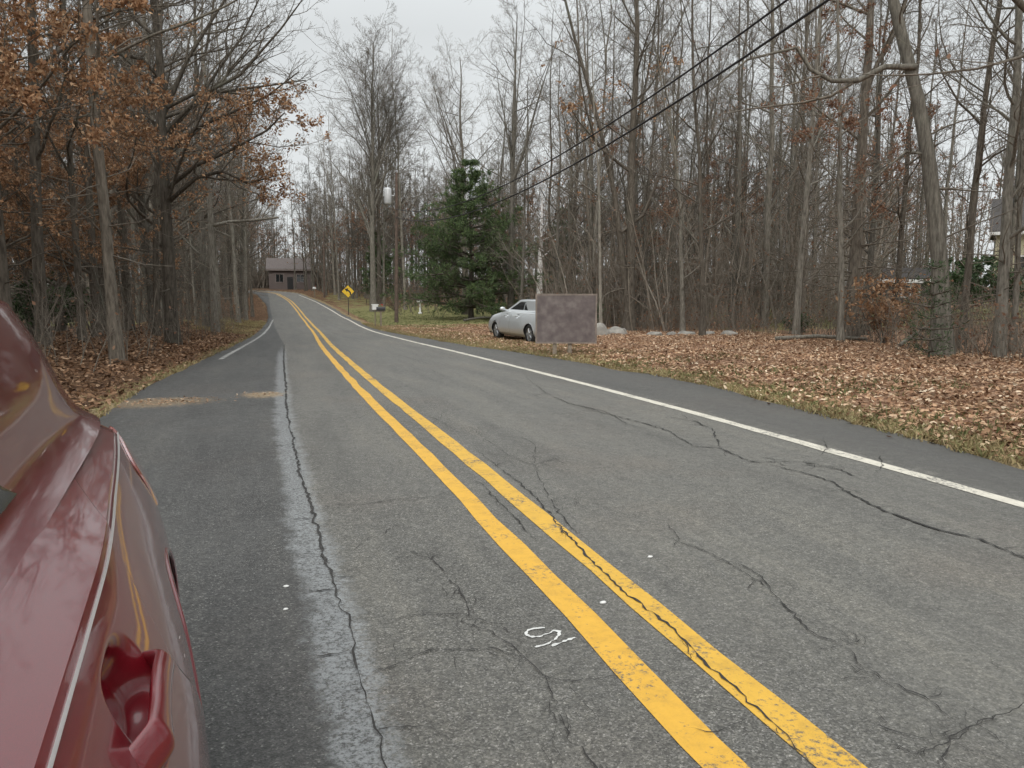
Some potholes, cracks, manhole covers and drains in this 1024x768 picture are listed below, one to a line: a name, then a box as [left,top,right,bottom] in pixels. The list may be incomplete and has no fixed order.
crack [573,406,1024,561]
crack [428,412,816,768]
crack [373,550,621,768]
crack [669,526,1024,768]
